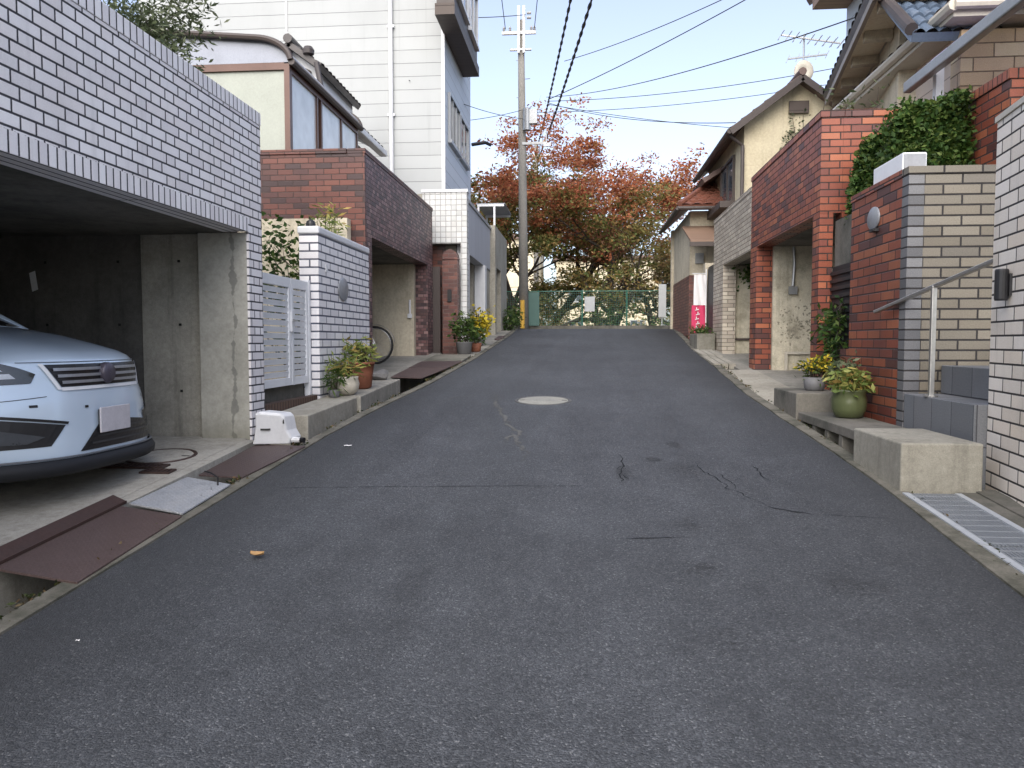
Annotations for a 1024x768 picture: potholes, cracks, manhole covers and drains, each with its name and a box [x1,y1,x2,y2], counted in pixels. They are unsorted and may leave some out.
crack [697,465,879,518]
manhole cover [125,448,198,463]
manhole cover [515,396,572,405]
drain grate [902,492,1024,574]
